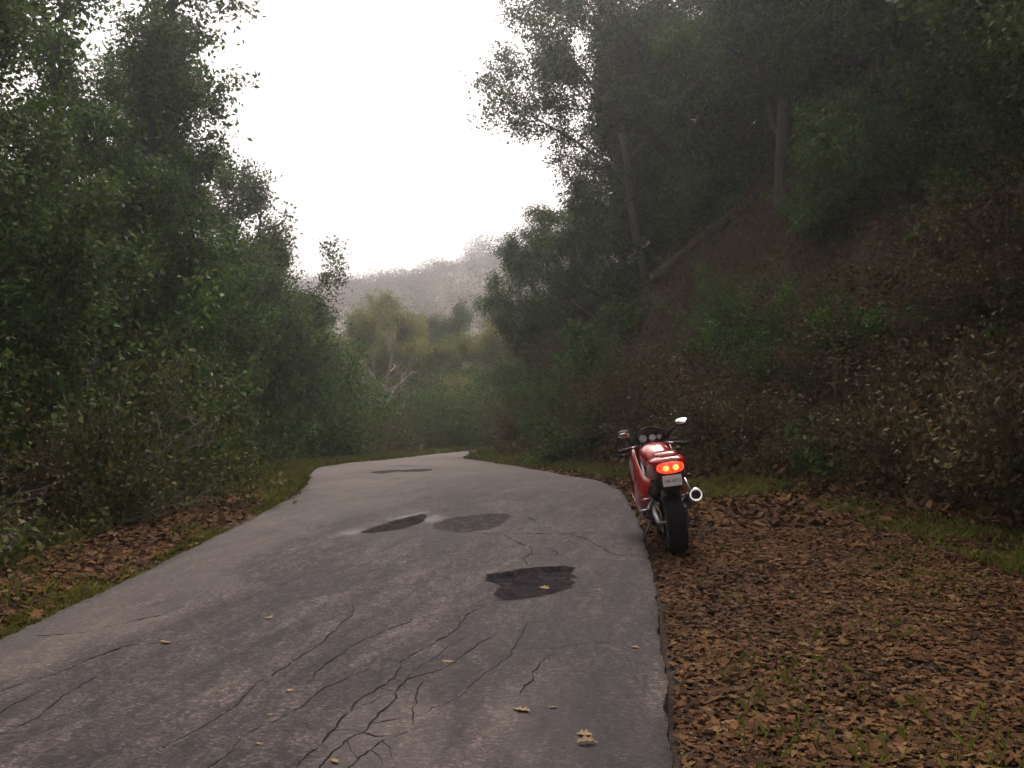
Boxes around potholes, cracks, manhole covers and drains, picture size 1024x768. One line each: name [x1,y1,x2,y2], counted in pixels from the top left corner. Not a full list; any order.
pothole [484,566,577,601]
pothole [431,513,512,533]
crack [0,608,177,735]
crack [478,517,633,566]
pothole [360,514,427,533]
crack [163,604,585,768]
